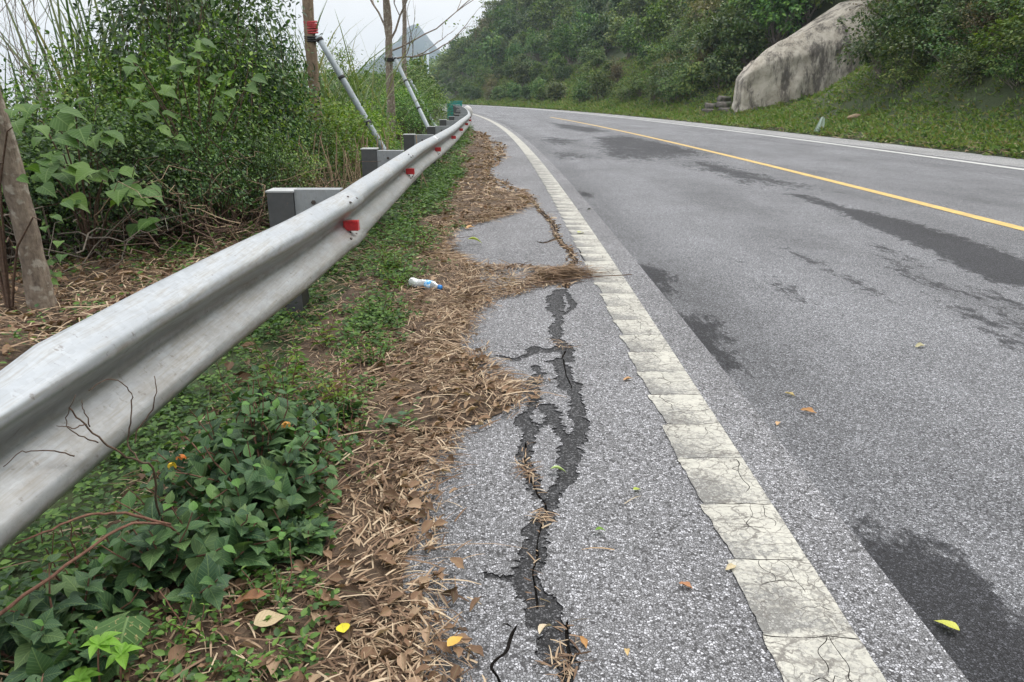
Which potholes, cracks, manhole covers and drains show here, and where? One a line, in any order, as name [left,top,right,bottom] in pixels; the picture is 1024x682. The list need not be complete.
crack [481,187,860,682]
